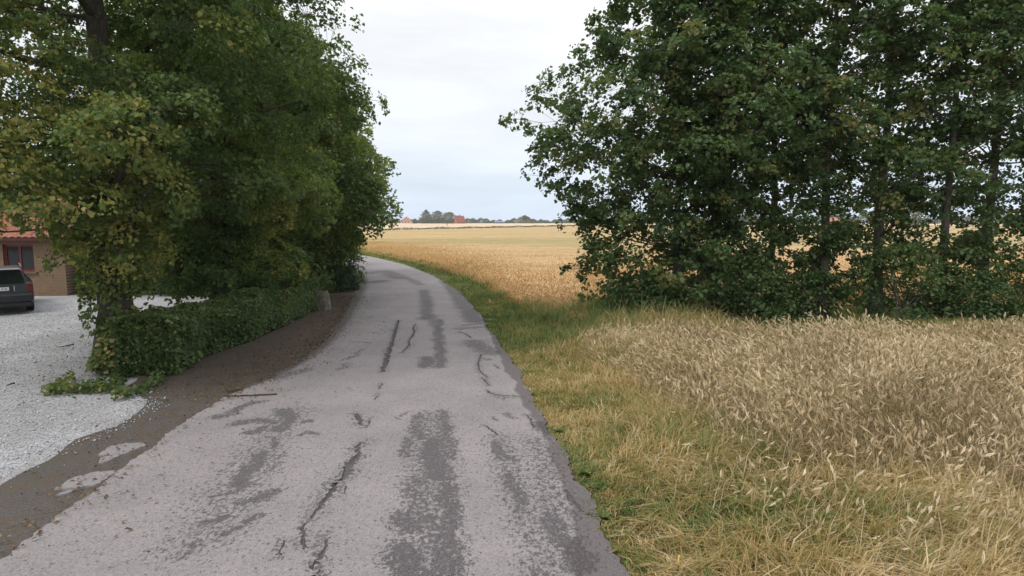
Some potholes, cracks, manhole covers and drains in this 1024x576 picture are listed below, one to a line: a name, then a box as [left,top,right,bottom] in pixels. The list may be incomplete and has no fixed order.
crack [279,320,416,576]
crack [459,323,502,396]
